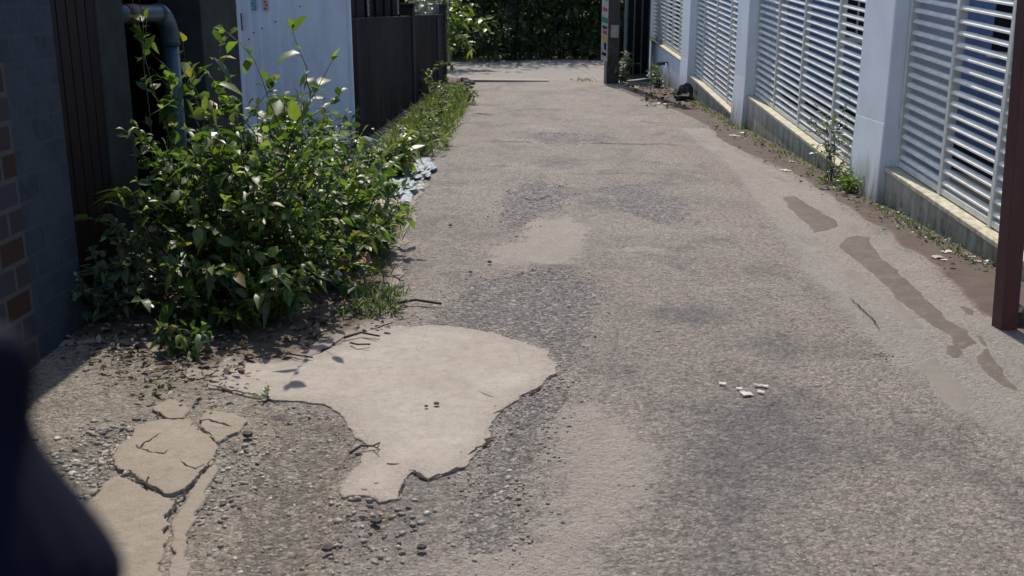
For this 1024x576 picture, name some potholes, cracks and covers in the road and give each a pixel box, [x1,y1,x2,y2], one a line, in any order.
crack [198,419,230,435]
crack [136,411,205,469]
crack [127,471,163,492]
